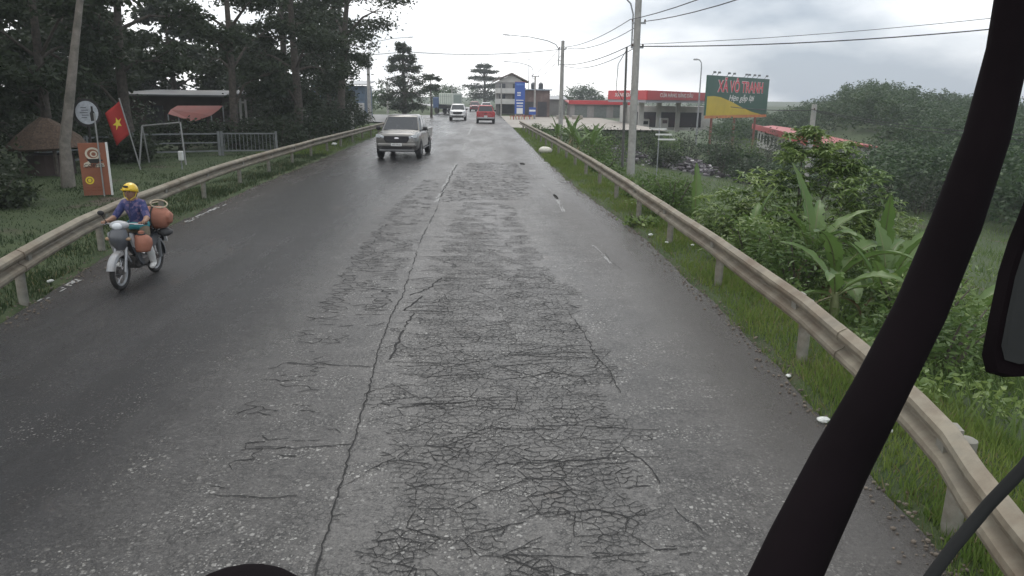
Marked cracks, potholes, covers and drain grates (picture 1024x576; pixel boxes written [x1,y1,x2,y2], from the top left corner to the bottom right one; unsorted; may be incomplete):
crack [218,180,698,576]
crack [447,162,543,202]
